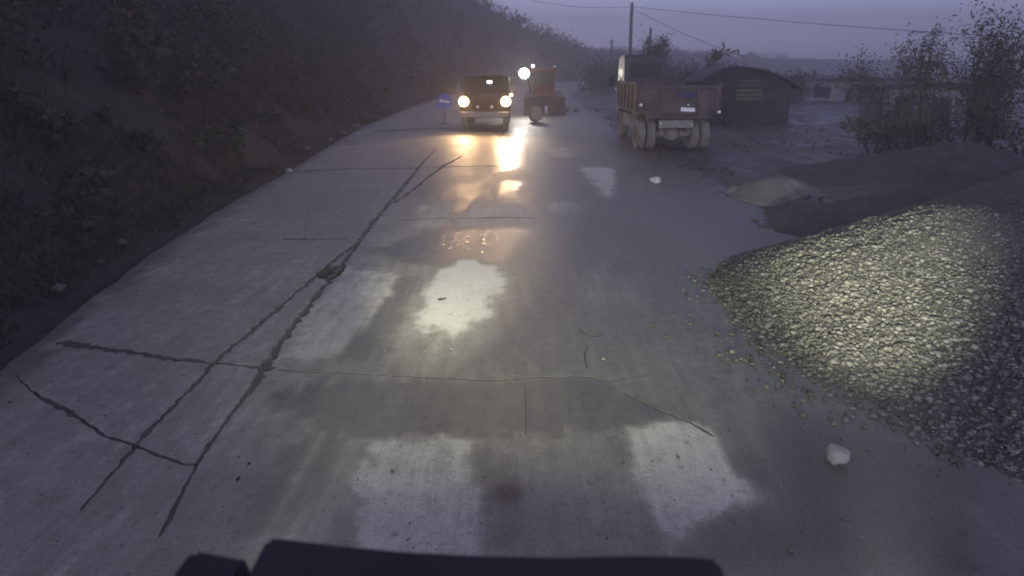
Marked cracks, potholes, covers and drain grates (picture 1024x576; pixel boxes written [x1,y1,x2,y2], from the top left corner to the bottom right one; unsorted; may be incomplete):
crack [16,144,714,538]
